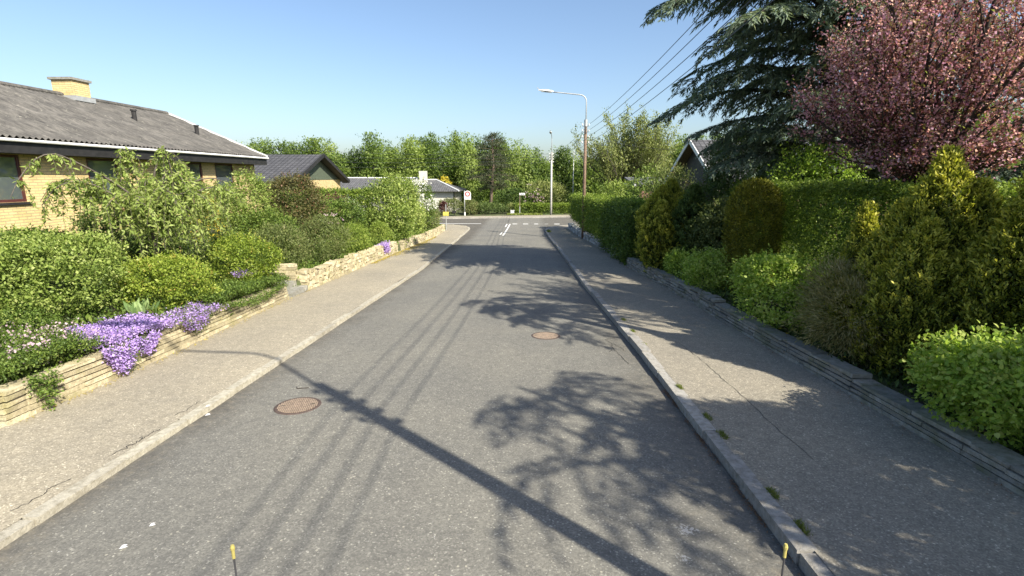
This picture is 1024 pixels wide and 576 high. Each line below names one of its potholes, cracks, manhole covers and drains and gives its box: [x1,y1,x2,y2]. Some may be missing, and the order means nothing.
manhole cover [531,332,560,340]
crack [686,348,815,461]
manhole cover [273,397,322,415]
